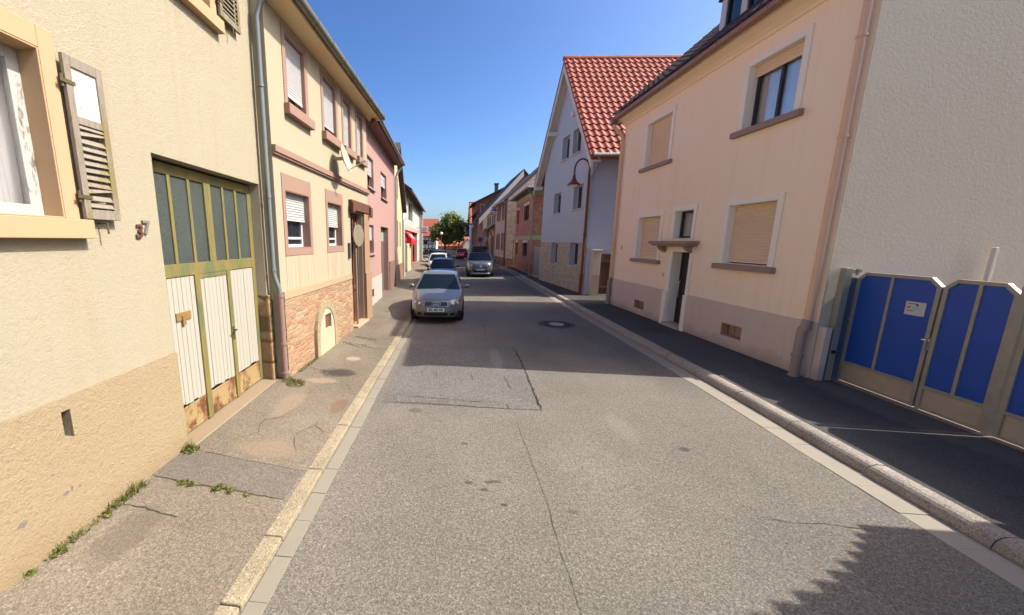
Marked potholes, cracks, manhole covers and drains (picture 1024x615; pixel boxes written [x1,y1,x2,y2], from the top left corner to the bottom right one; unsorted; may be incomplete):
crack [124,504,177,517]
crack [514,415,582,615]
manhole cover [538,320,576,328]
